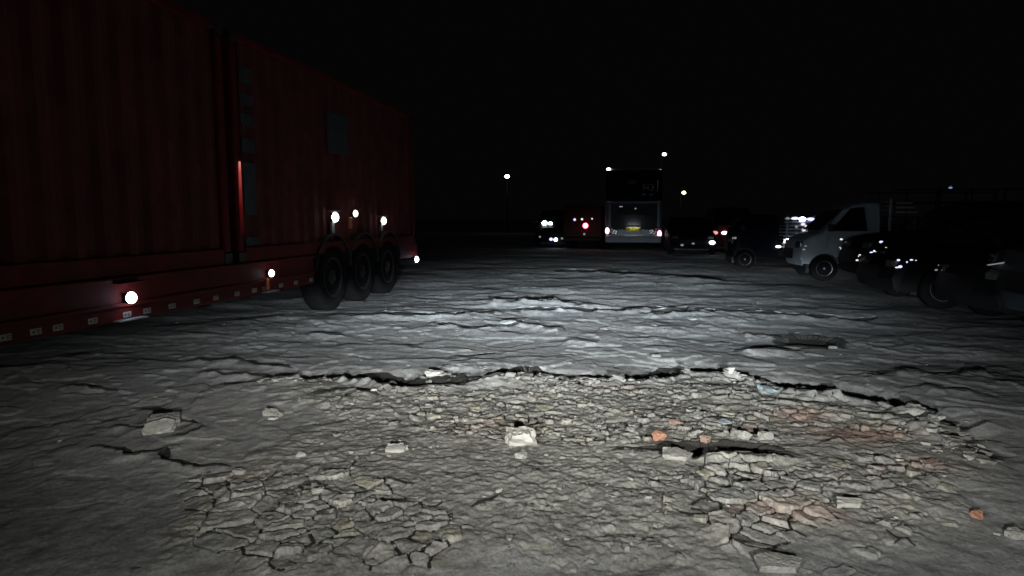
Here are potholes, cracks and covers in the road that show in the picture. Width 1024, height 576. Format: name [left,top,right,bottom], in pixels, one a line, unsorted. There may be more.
crack [91,407,231,467]
pothole [771,333,849,349]
crack [180,460,453,571]
crack [307,298,879,342]
crack [195,353,986,550]
